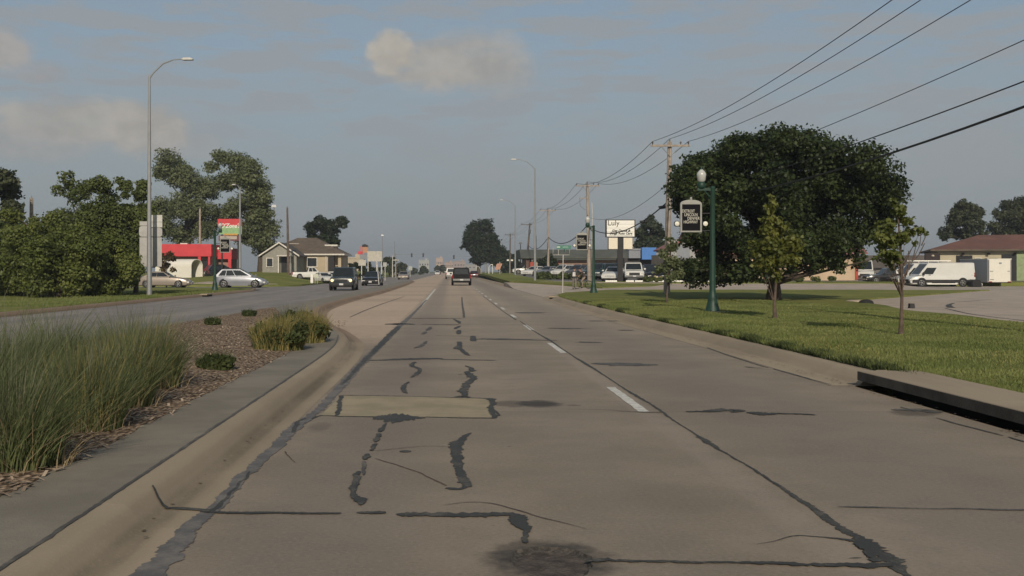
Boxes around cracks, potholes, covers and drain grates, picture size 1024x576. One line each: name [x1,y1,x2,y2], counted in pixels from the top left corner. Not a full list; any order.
crack [128,300,500,576]
